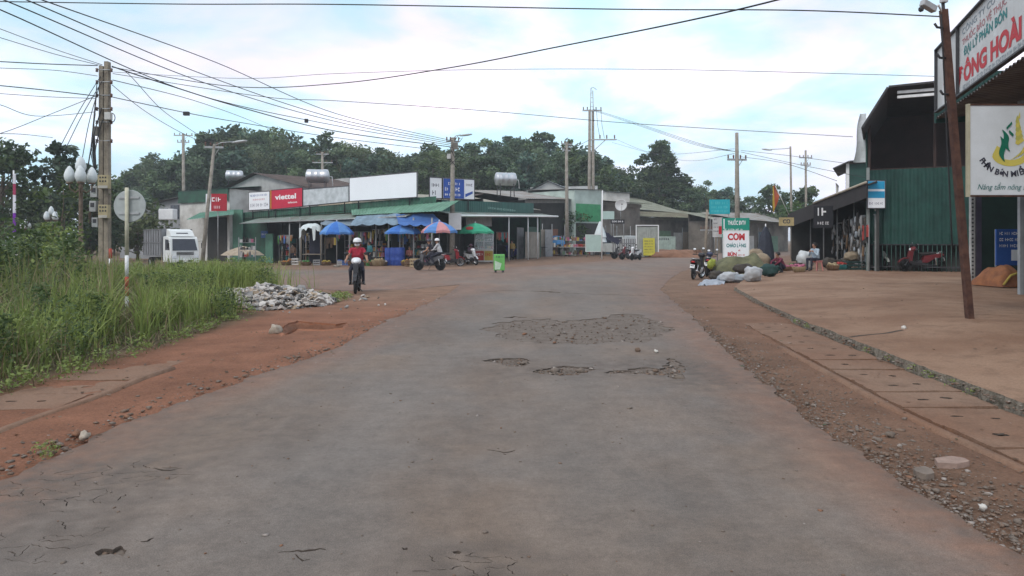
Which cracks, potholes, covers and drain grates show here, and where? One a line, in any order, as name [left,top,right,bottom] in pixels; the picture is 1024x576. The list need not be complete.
crack [0,461,195,564]
crack [278,548,326,562]
pothole [533,366,596,376]
pothole [479,314,675,345]
pothole [605,358,686,379]
pothole [483,358,529,367]
crack [426,553,517,576]
